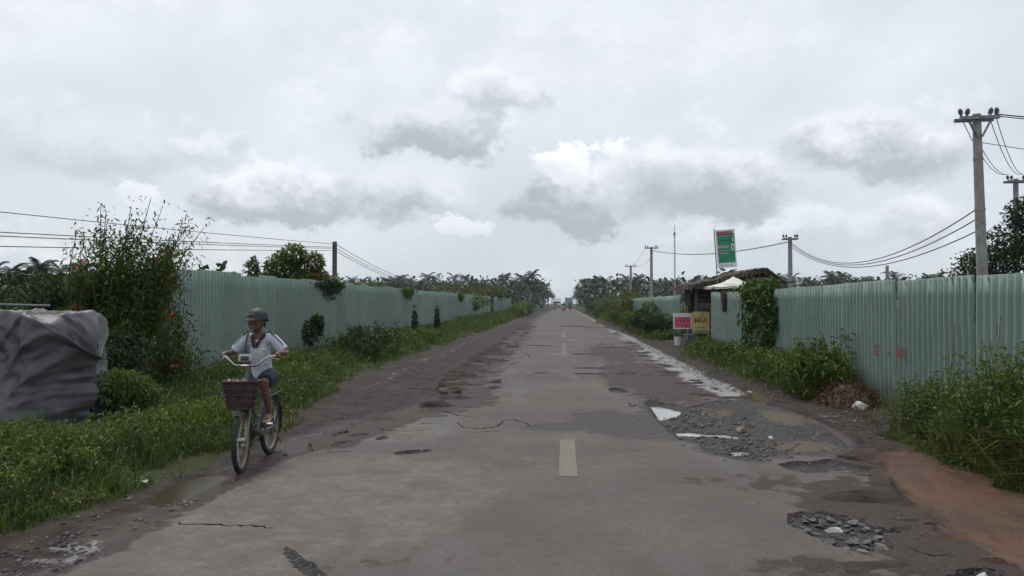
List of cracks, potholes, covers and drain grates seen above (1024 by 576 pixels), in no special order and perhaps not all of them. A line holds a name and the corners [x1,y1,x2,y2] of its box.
pothole [644,399,849,461]
crack [375,393,538,433]
pothole [787,511,916,555]
pothole [777,458,876,473]
pothole [946,567,1006,576]
pothole [282,546,328,576]
